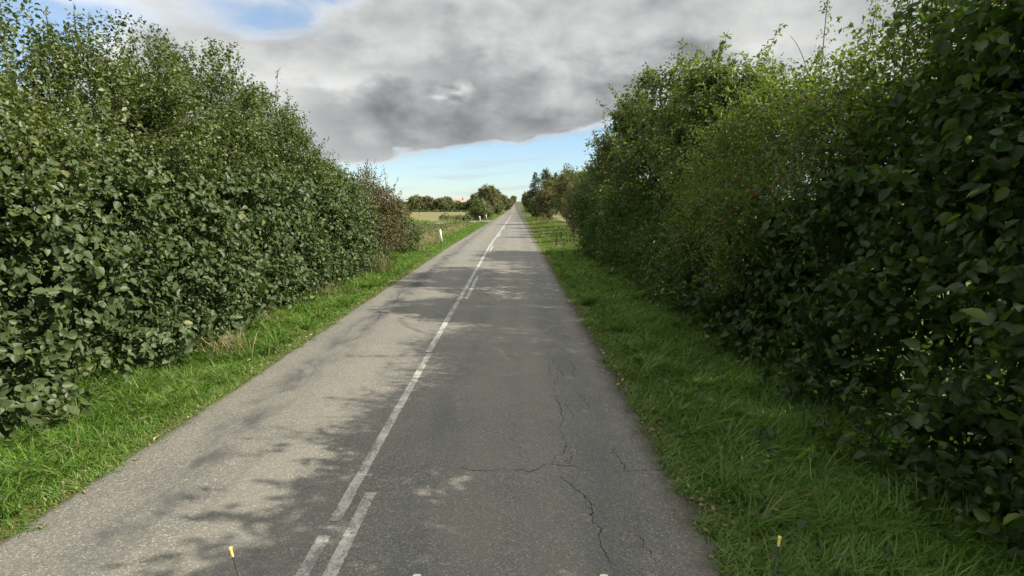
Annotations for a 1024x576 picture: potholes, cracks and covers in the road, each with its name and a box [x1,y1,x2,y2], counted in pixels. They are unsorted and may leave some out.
crack [466,350,611,563]
